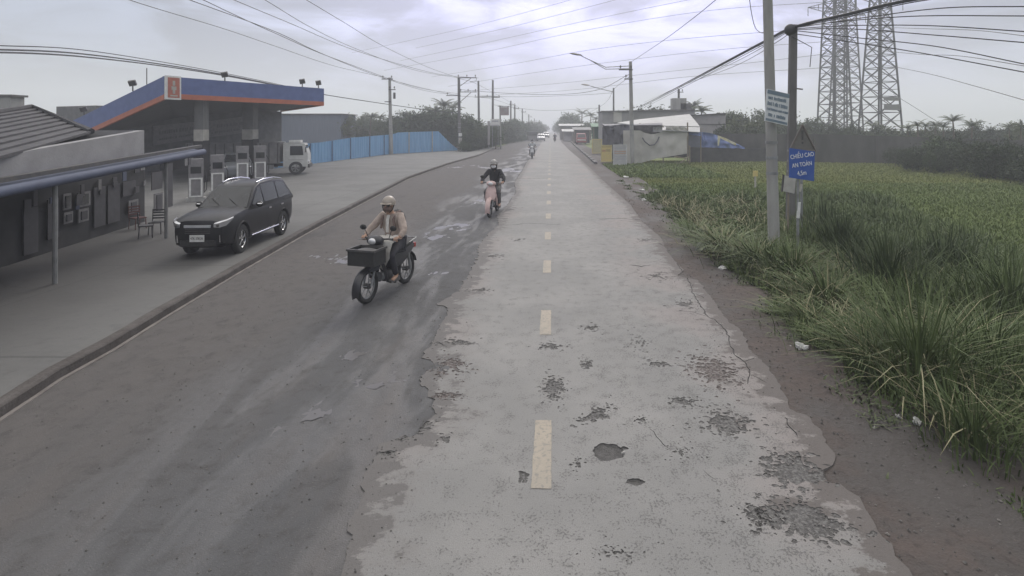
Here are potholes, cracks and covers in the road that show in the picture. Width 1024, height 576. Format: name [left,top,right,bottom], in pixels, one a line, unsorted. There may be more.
pothole [593,443,629,461]
crack [528,265,890,550]
